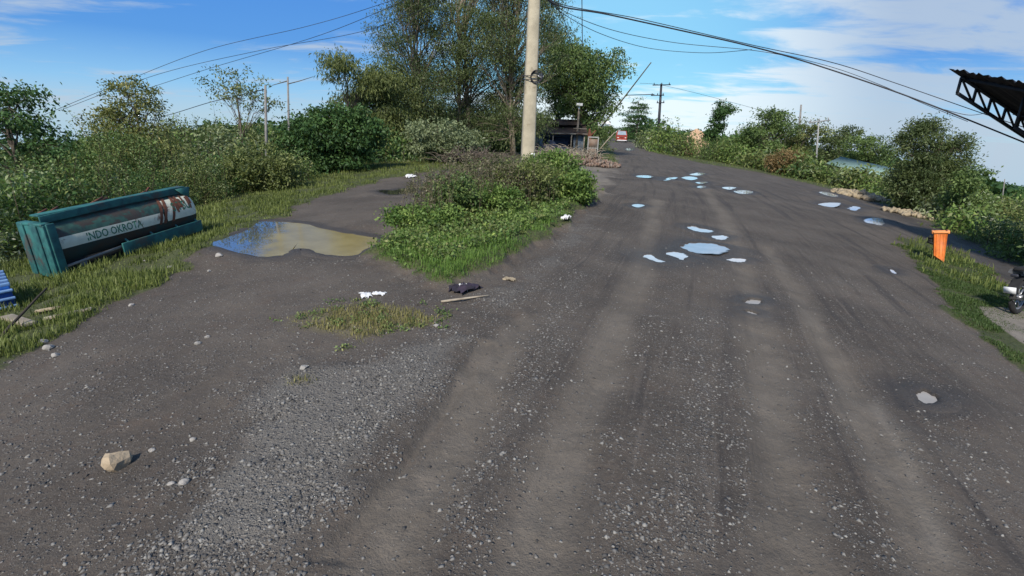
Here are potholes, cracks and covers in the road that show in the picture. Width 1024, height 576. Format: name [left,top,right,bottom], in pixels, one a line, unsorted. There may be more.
pothole [894,382,962,414]
pothole [665,239,745,259]
pothole [628,252,680,266]
pothole [192,219,388,261]
pothole [833,204,877,214]
pothole [672,223,728,236]
pothole [727,294,778,310]
pothole [622,173,666,181]
pothole [801,200,852,210]
pothole [697,232,743,244]
